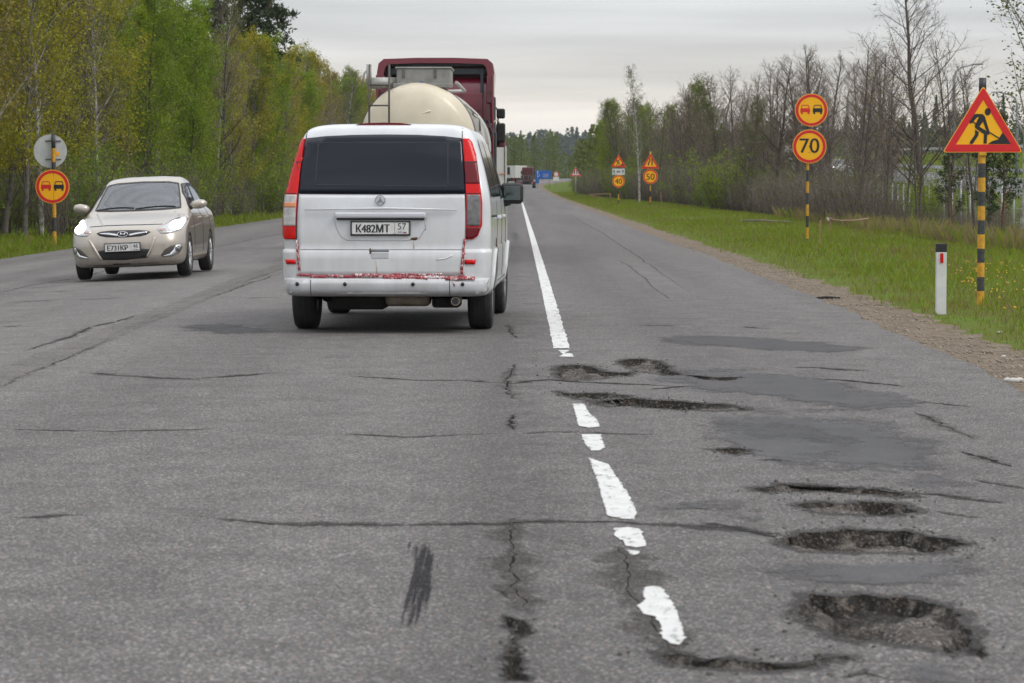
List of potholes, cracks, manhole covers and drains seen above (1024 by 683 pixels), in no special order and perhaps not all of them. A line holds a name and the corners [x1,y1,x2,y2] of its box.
pothole [787,590,988,659]
crack [202,516,791,610]
pothole [549,364,637,383]
pothole [787,500,926,517]
crack [357,363,685,435]
crack [617,546,673,655]
pothole [772,526,977,555]
crack [587,224,682,297]
pothole [746,482,922,498]
crack [83,372,265,380]
pothole [587,397,753,411]
crack [770,401,1023,517]
